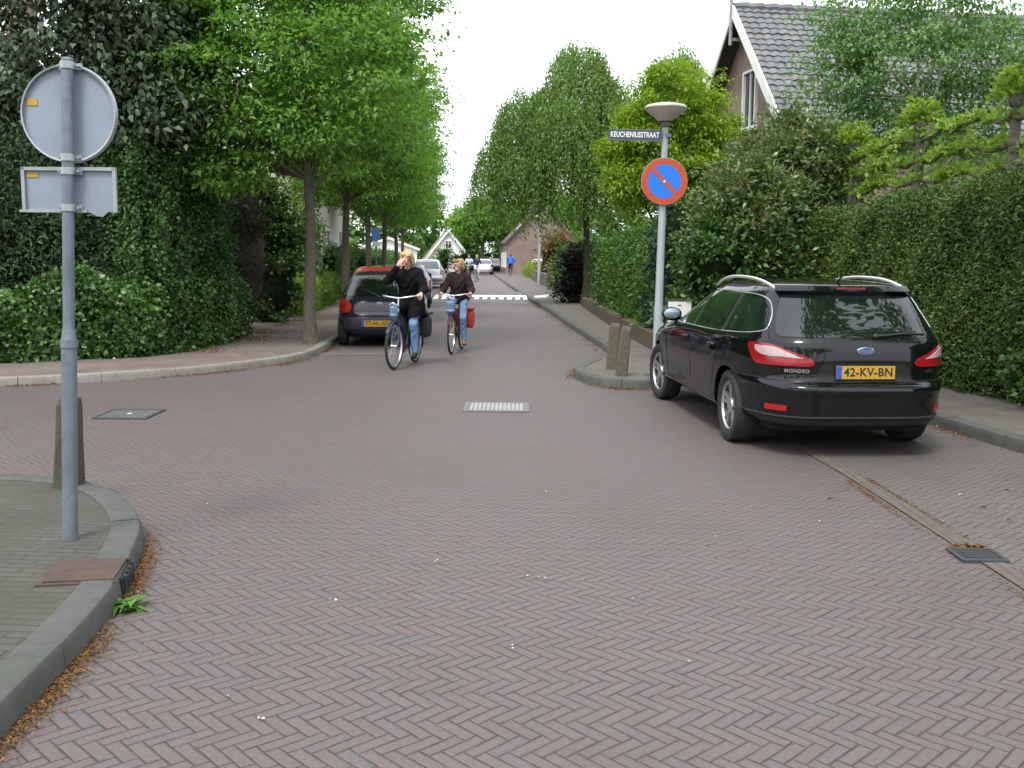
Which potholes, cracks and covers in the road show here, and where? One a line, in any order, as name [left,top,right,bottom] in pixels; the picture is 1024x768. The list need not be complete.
manhole cover [91,409,166,420]
drain grate [946,547,1010,563]
